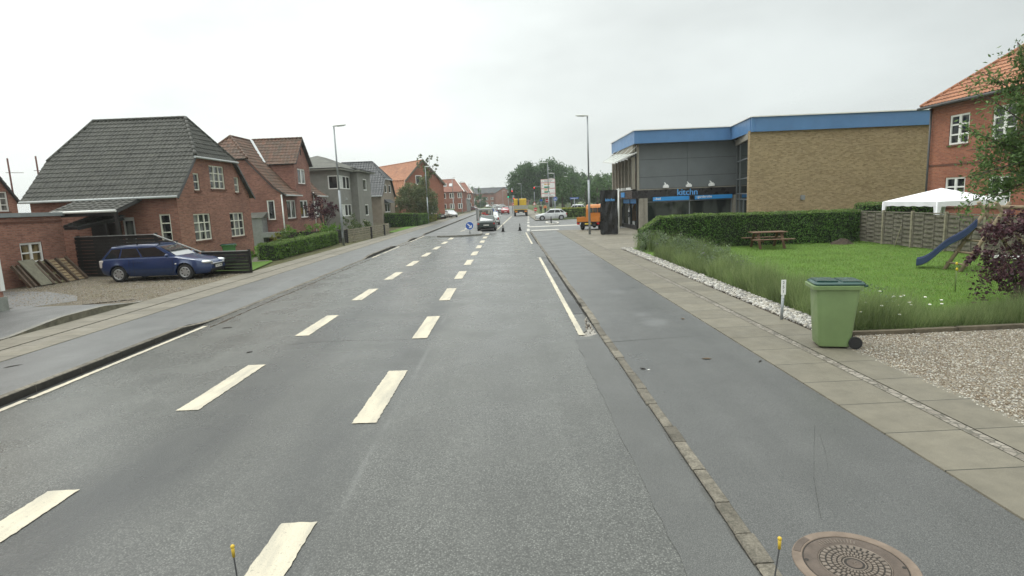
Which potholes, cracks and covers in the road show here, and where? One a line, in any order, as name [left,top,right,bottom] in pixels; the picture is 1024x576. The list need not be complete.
manhole cover [792,531,923,576]
